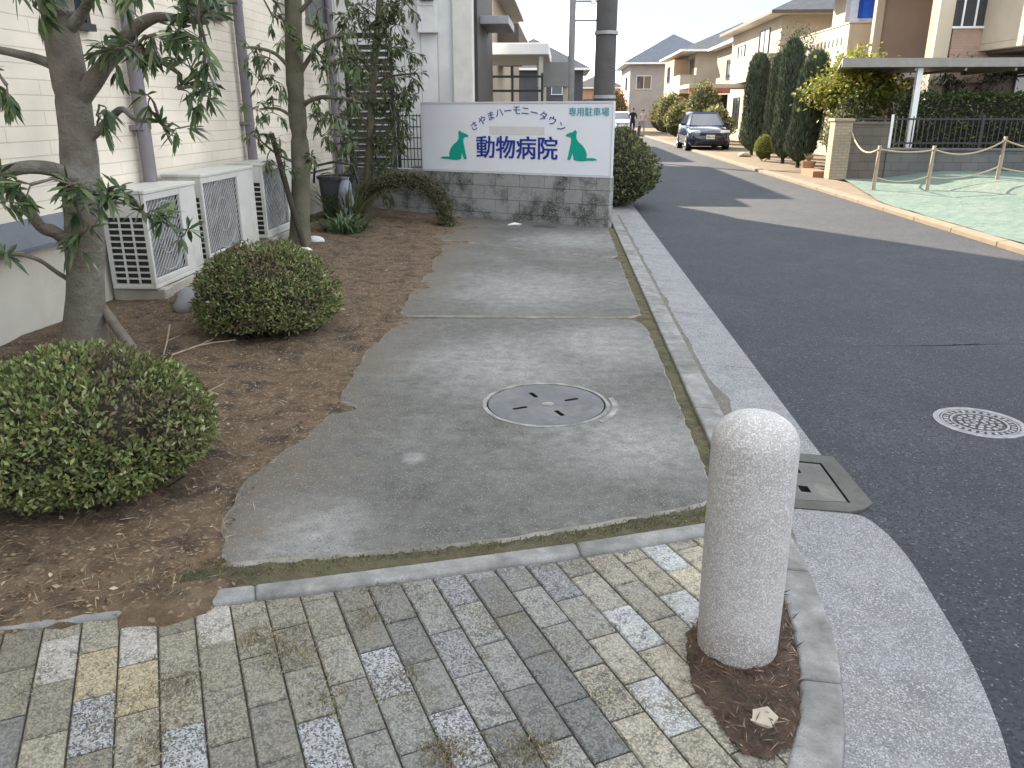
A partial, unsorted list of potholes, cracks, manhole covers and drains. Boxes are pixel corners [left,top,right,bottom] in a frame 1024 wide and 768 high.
manhole cover [932,407,1024,439]
manhole cover [482,383,619,428]
